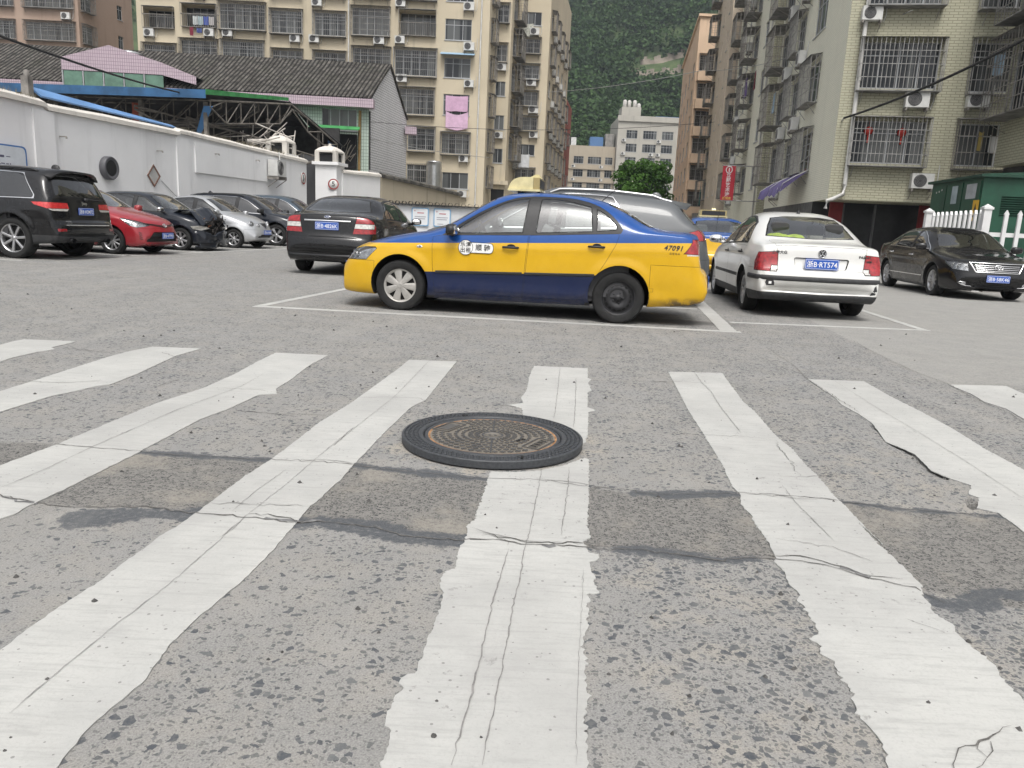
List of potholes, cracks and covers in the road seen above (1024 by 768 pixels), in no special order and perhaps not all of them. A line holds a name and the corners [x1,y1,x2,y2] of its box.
manhole cover [402,412,583,469]
crack [953,725,1011,768]
